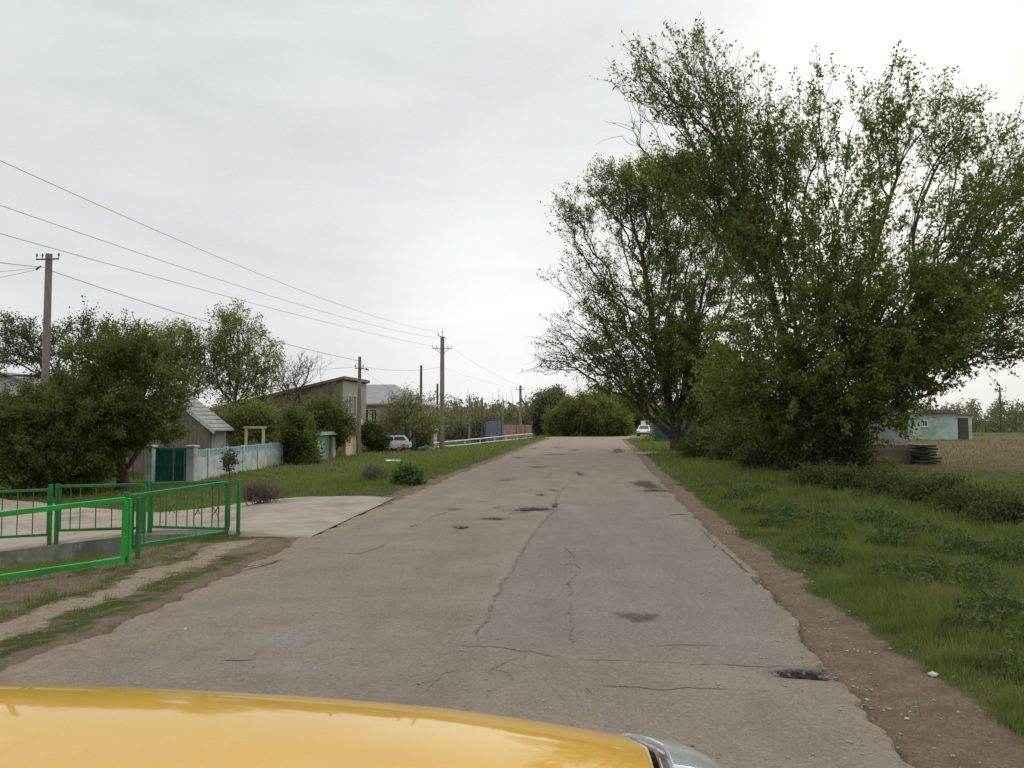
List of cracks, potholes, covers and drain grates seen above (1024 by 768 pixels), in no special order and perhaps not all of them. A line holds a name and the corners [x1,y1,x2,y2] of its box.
crack [700,529,758,584]
pothole [768,668,833,681]
crack [564,547,580,645]
crack [586,685,768,694]
